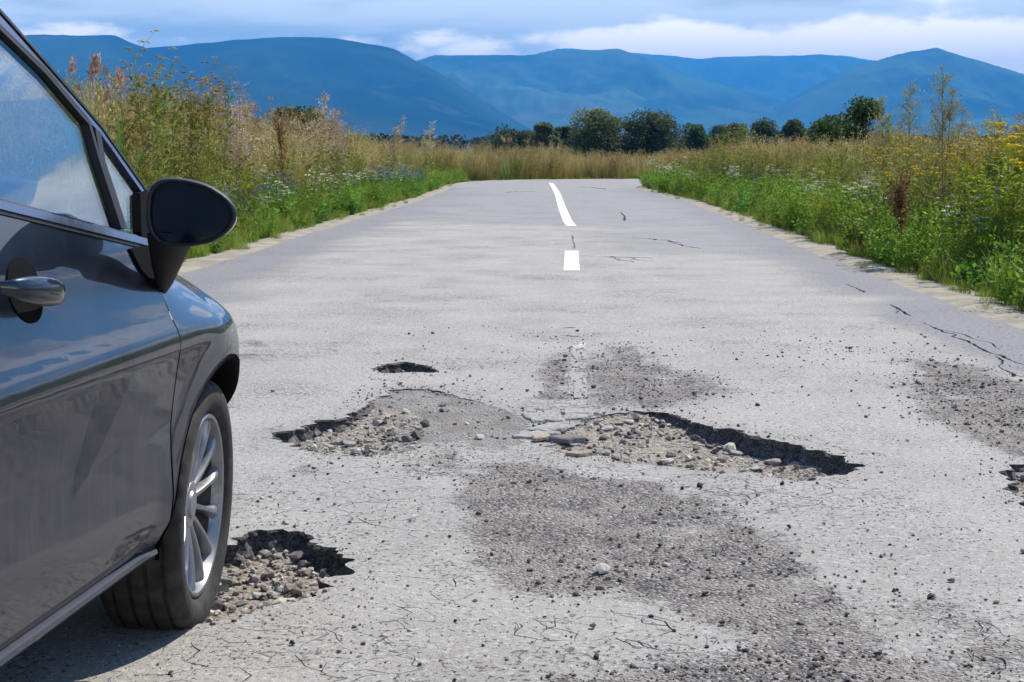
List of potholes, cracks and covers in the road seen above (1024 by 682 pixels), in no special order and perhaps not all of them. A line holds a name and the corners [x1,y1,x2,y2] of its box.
crack [514,611,718,661]
pothole [543,411,866,481]
pothole [272,388,530,458]
crack [890,304,1022,377]
pothole [371,362,439,373]
pothole [202,529,355,624]
crack [935,617,1024,675]
pothole [998,464,1024,506]
crack [144,574,480,682]
